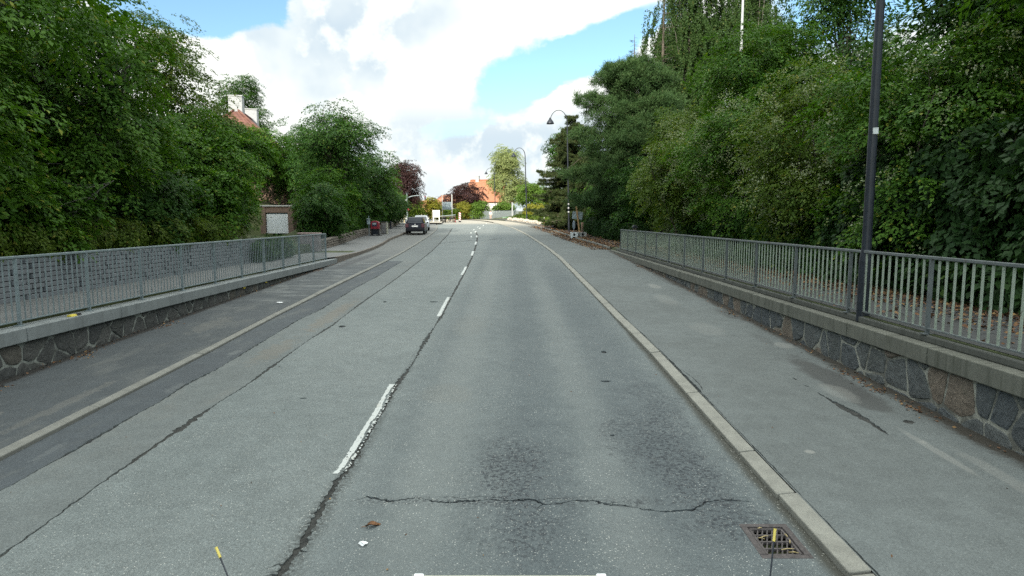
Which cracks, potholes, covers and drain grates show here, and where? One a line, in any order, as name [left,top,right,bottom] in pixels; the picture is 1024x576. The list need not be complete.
crack [346,262,880,576]
drain grate [739,524,814,559]
